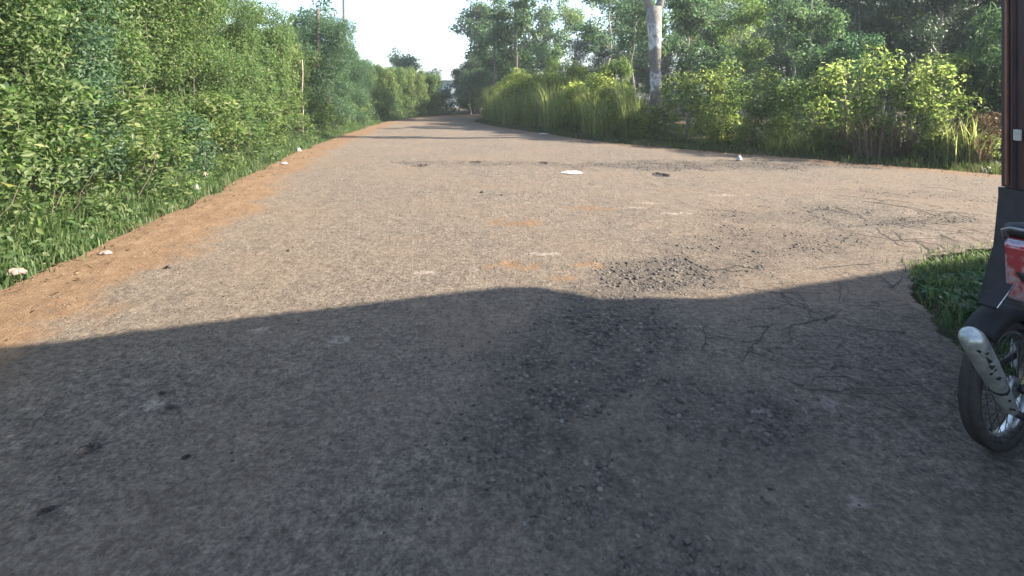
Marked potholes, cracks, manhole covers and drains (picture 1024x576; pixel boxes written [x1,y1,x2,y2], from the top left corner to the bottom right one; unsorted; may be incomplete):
crack [816,187,995,257]
crack [697,263,993,420]
